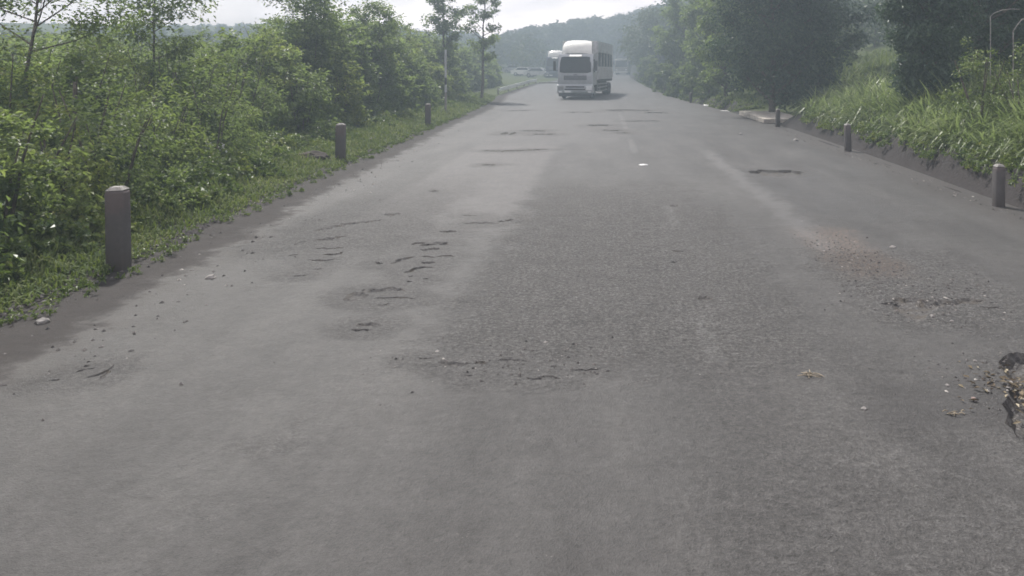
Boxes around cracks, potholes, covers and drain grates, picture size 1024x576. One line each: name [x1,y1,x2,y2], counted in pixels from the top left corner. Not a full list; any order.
crack [374,215,514,282]
pothole [999,352,1024,441]
crack [288,213,400,277]
